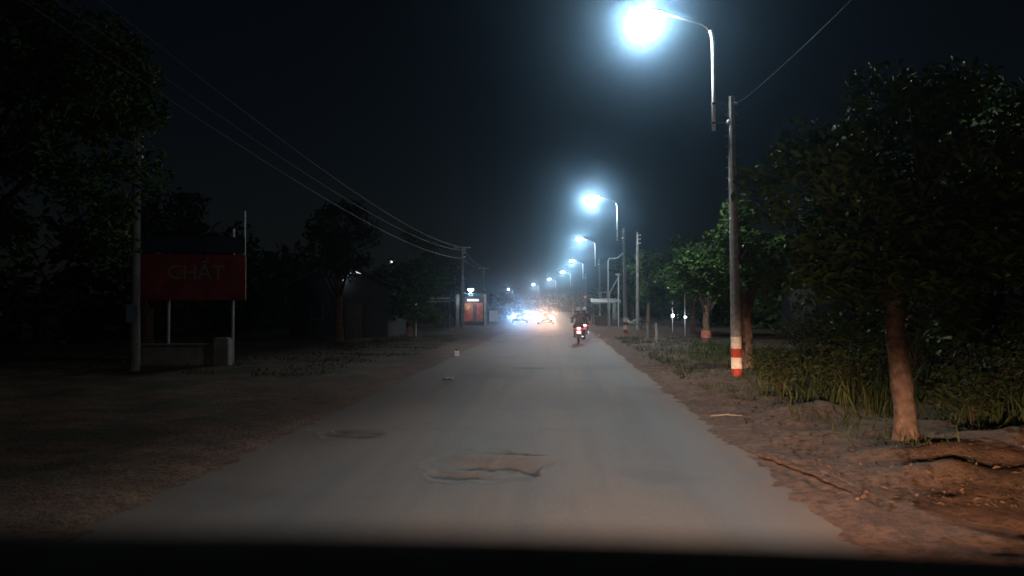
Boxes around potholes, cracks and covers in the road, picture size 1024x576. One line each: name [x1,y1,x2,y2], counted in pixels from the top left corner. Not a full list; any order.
pothole [413,446,568,484]
pothole [314,429,390,440]
